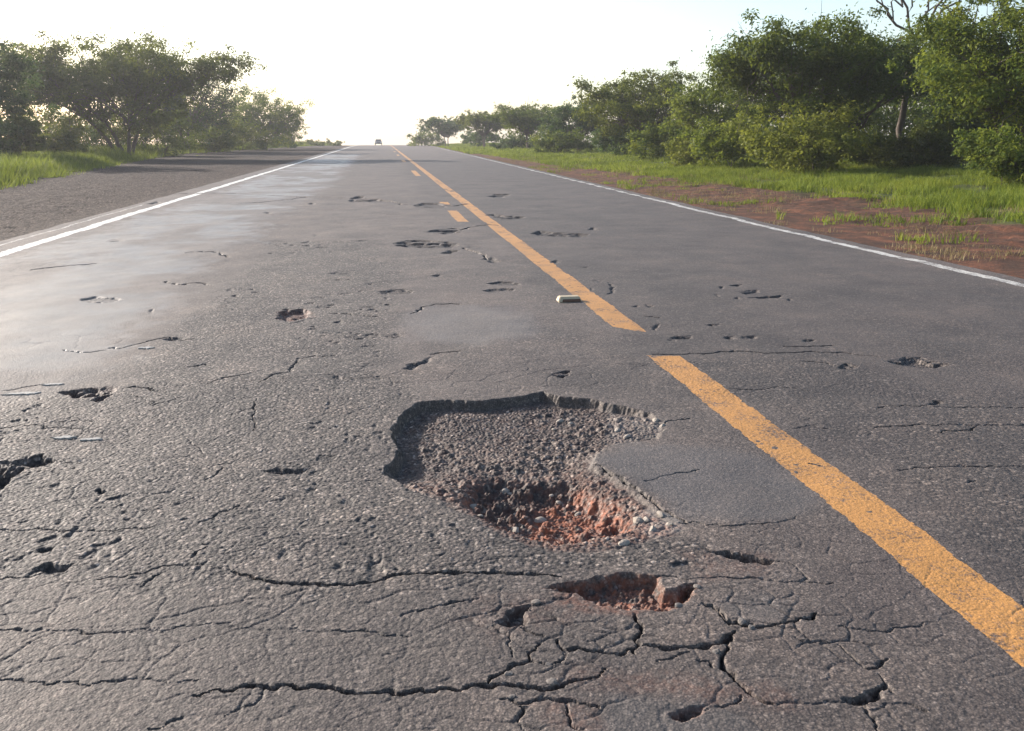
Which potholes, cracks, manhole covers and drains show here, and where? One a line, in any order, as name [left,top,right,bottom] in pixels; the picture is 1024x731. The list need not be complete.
pothole [393,240,462,248]
pothole [666,704,707,723]
pothole [55,386,121,399]
crack [0,546,929,731]
pothole [381,391,691,555]
crack [873,404,1024,434]
pothole [884,356,954,369]
pothole [0,453,56,490]
pothole [542,571,703,613]
crack [651,345,881,366]
pothole [274,308,316,322]
crack [63,337,193,353]
